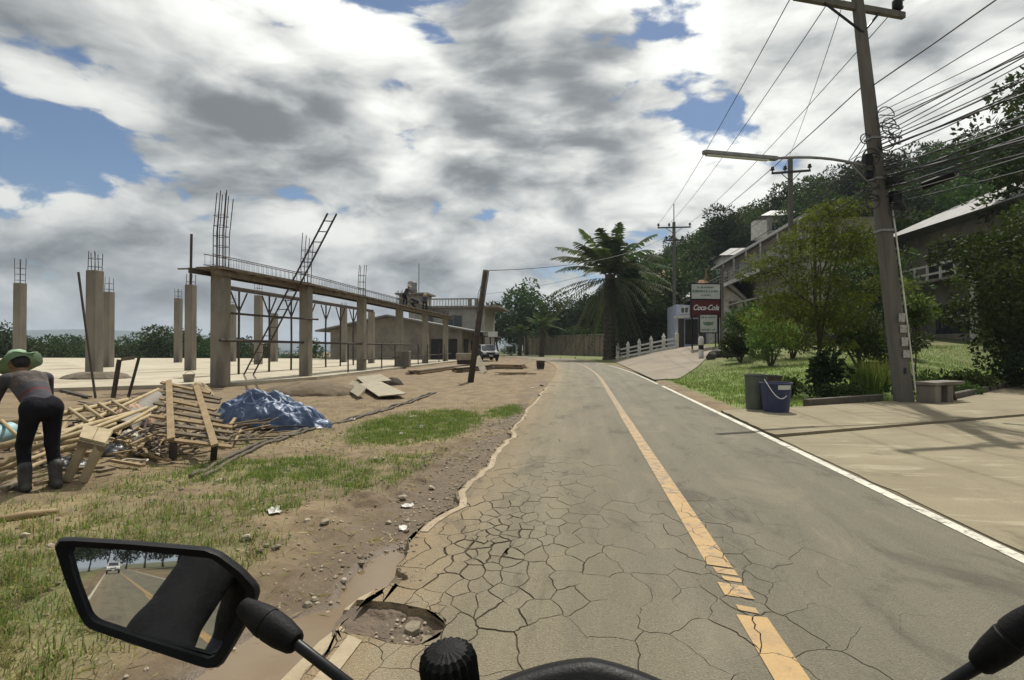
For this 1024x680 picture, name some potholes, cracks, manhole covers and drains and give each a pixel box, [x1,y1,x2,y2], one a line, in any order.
crack [604,455,920,680]
crack [303,444,653,680]
pothole [332,600,446,645]
